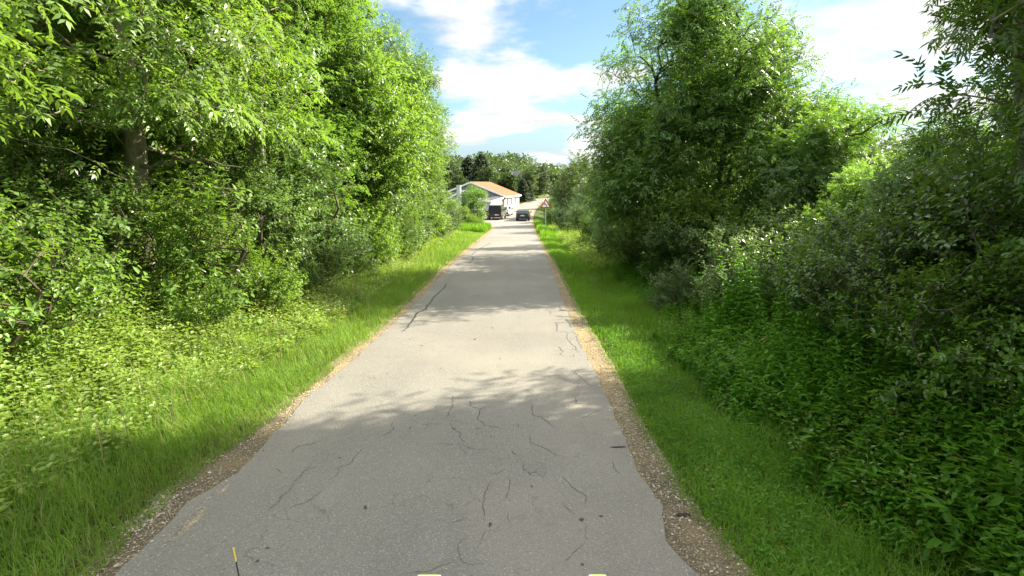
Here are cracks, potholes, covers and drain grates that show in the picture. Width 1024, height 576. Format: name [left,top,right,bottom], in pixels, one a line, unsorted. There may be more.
crack [271,421,394,508]
crack [549,307,599,417]
crack [406,397,556,574]
